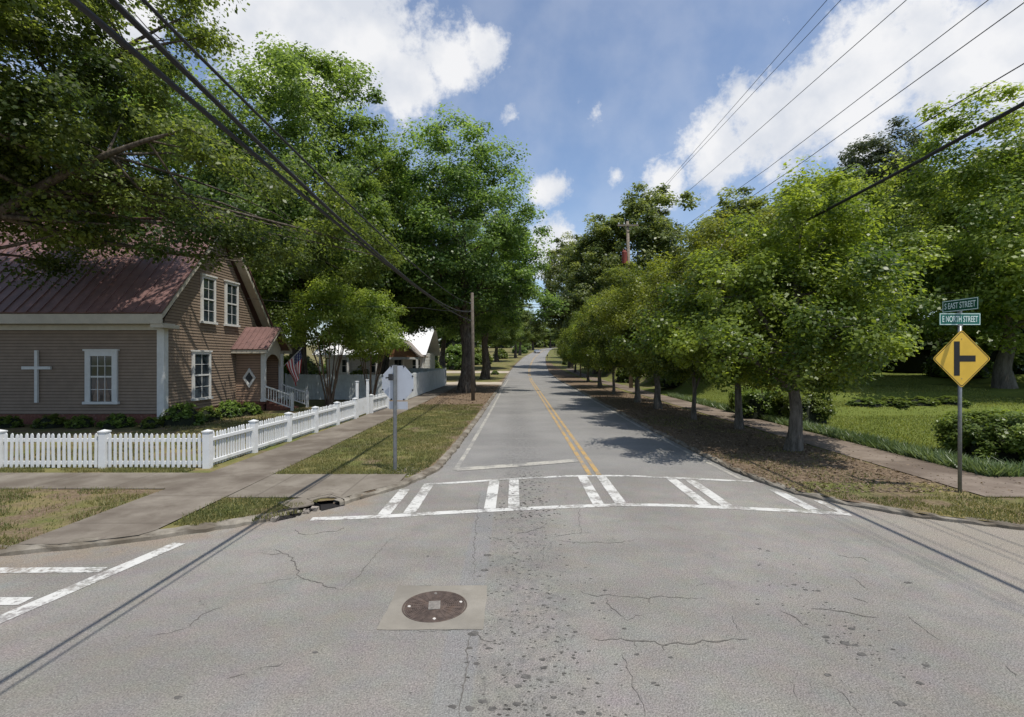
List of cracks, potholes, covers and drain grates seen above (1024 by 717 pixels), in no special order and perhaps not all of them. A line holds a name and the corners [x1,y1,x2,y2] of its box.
drain grate [270,492,346,522]
crack [581,583,714,619]
crack [597,620,741,710]
crack [261,550,343,590]
crack [780,555,870,626]
manhole cover [402,591,467,623]
